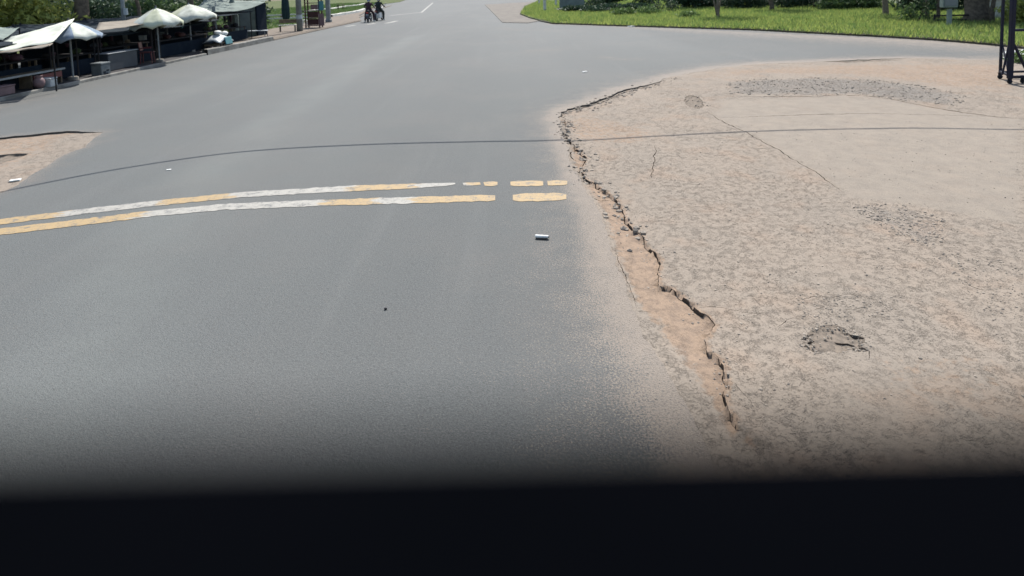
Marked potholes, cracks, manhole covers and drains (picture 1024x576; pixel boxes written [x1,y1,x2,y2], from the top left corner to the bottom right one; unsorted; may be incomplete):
pothole [801,324,867,354]
crack [563,117,753,421]
pothole [684,95,704,109]
